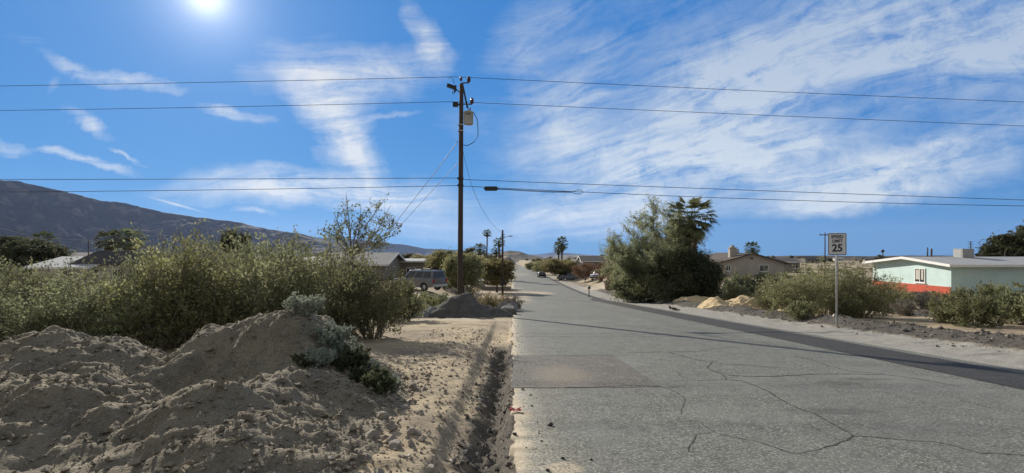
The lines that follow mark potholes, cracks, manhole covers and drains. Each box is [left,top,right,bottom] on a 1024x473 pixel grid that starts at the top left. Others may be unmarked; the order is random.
crack [627,348,1021,455]
